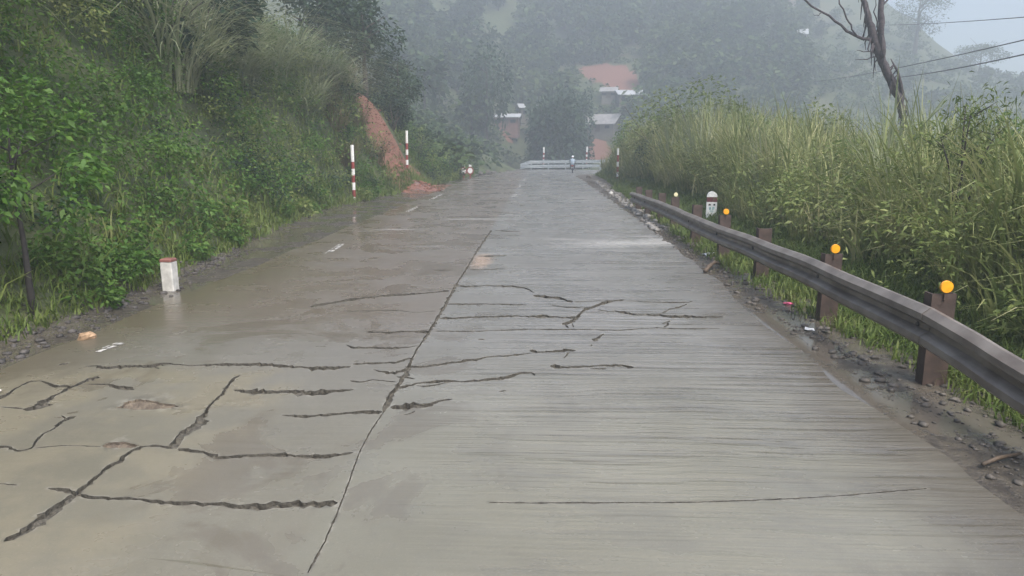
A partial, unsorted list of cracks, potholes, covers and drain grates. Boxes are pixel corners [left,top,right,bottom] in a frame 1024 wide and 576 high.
pothole [117,399,179,410]
crack [0,255,722,542]
